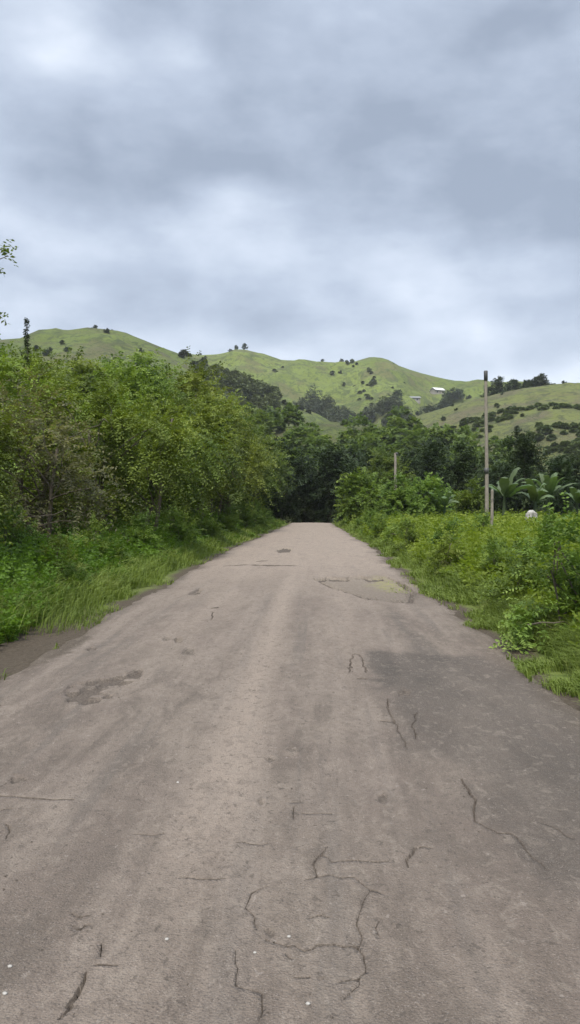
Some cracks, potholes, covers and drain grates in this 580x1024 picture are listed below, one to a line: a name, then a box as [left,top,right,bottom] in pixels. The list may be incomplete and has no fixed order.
crack [285,800,336,821]
pothole [273,546,295,554]
crack [0,782,78,841]
crack [52,911,124,1024]
crack [173,840,435,1024]
crack [346,653,420,751]
crack [458,777,578,873]
